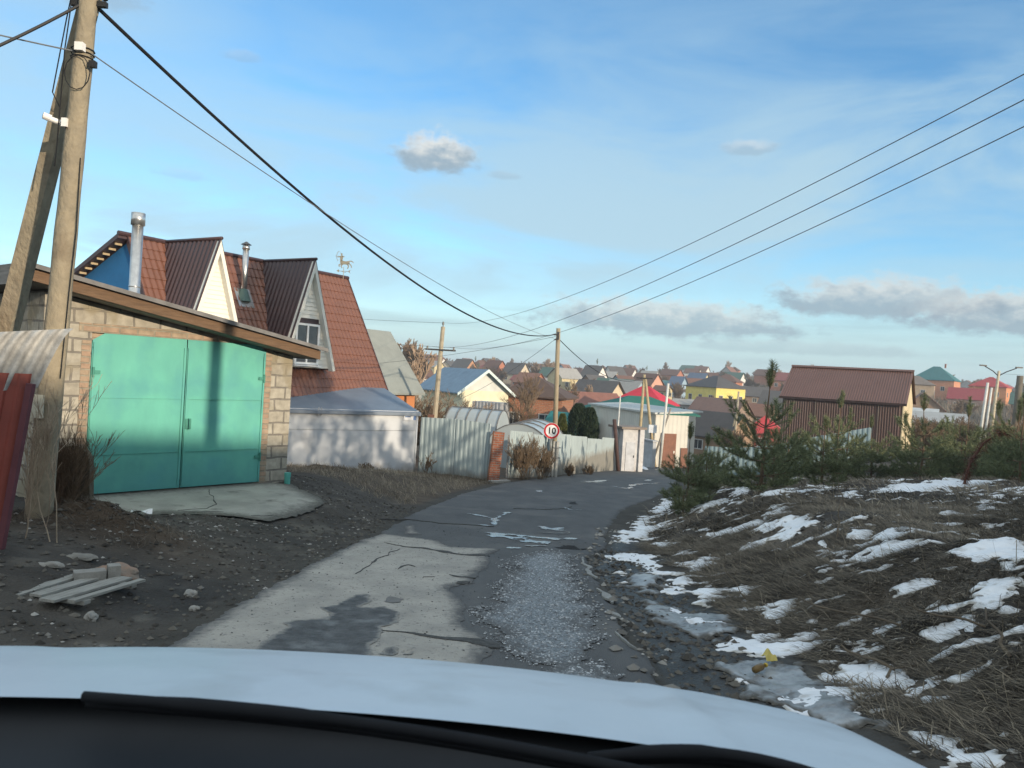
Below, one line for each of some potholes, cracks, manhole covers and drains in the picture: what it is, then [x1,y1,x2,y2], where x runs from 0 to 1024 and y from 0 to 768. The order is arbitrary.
crack [379,518,494,527]
crack [355,542,490,585]
crack [382,630,500,649]
crack [178,489,221,512]
